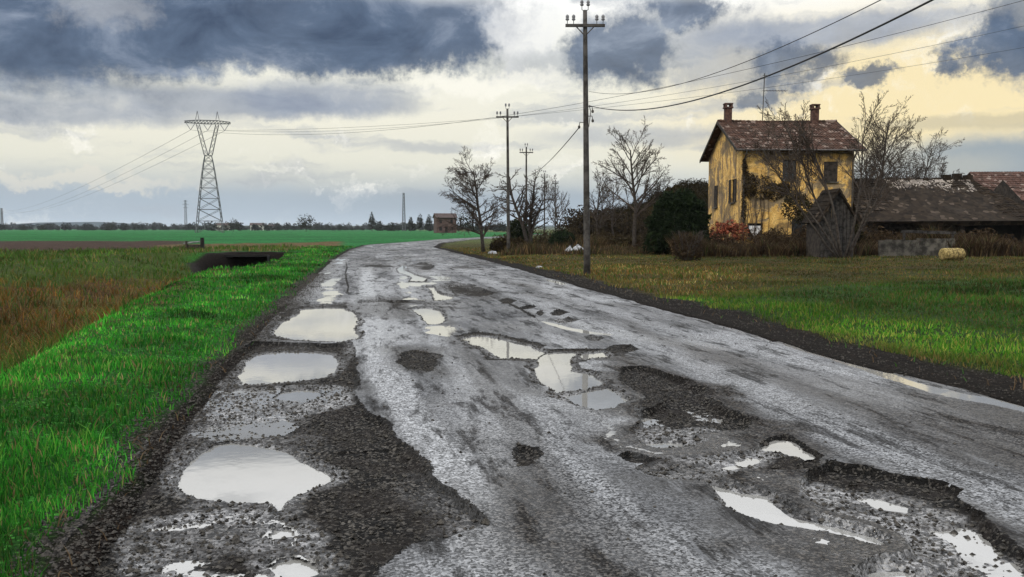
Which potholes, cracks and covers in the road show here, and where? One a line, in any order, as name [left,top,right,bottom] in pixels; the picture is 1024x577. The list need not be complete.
pothole [797,459,1024,577]
pothole [619,365,760,448]
pothole [396,264,430,282]
pothole [409,262,436,272]
pothole [635,434,825,481]
pothole [426,285,455,301]
pothole [55,341,489,577]
pothole [455,332,638,410]
pothole [267,304,366,344]
pothole [699,478,893,546]
pothole [511,445,544,467]
